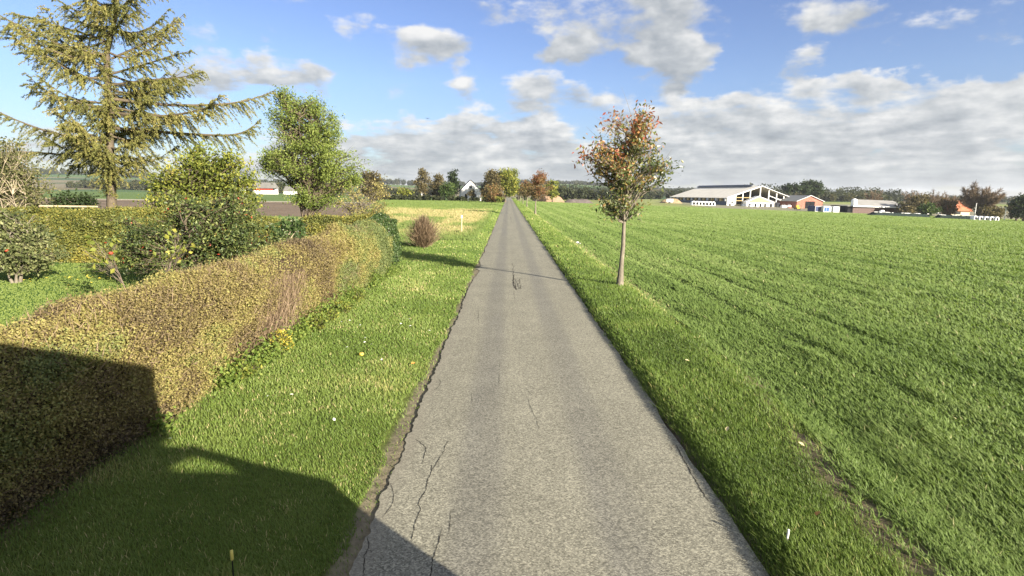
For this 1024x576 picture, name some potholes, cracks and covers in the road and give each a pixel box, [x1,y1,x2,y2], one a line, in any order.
crack [411,424,451,576]
